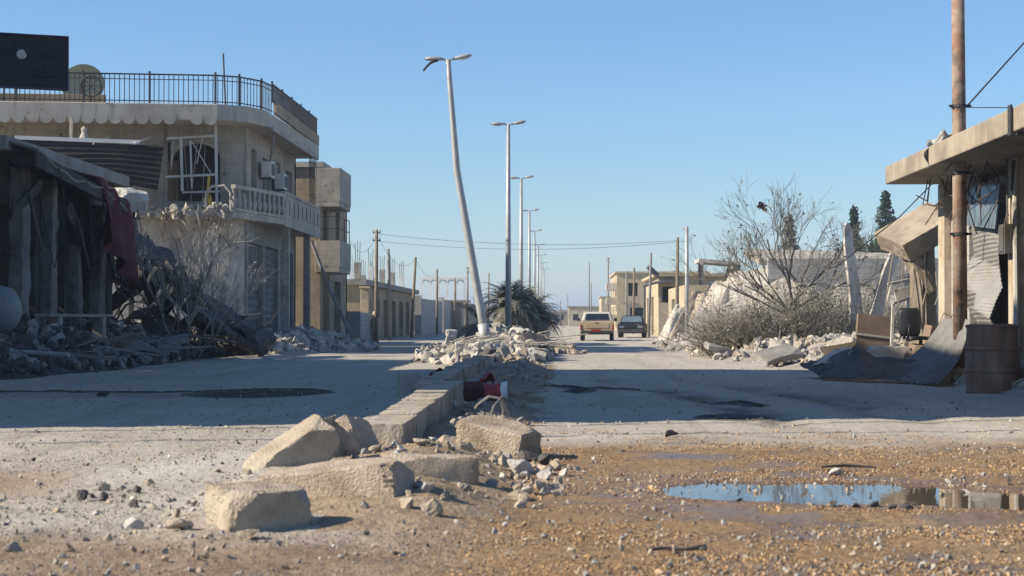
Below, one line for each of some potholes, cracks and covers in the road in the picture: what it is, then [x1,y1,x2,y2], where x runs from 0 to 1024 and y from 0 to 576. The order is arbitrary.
pothole [181,388,336,398]
pothole [635,479,1023,512]
